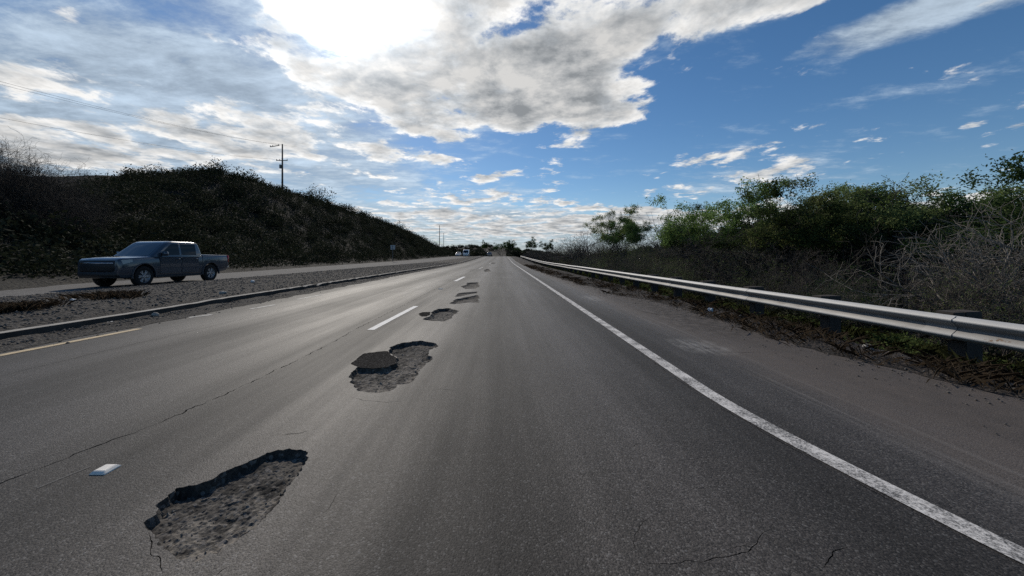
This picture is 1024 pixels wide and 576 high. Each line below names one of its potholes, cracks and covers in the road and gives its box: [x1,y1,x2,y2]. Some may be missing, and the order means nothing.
pothole [349,341,438,393]
crack [633,515,768,574]
pothole [144,448,309,562]
crack [0,273,467,484]
pothole [423,308,458,322]
pothole [449,295,479,304]
